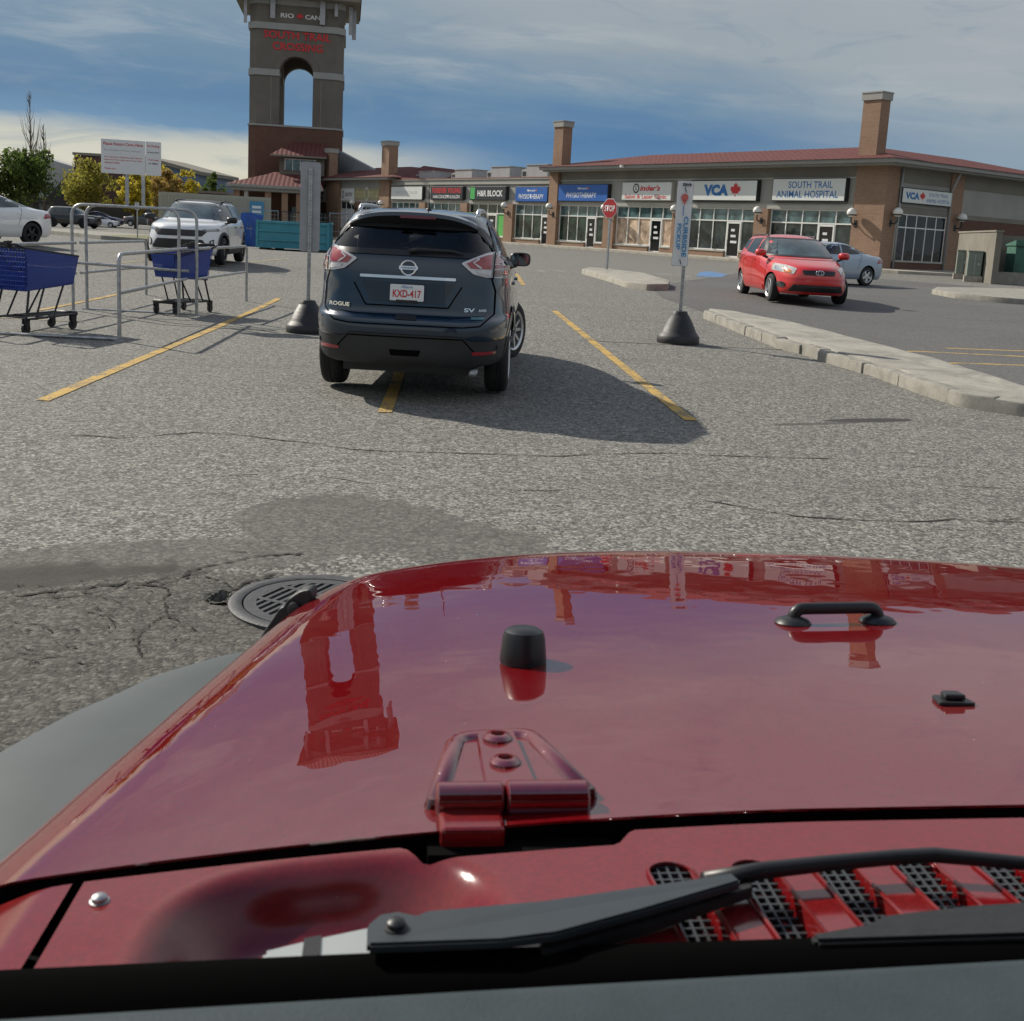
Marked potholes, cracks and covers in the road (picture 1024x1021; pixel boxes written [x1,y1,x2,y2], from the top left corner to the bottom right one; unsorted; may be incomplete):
crack [70,432,822,459]
crack [0,551,301,666]
crack [701,500,1019,522]
